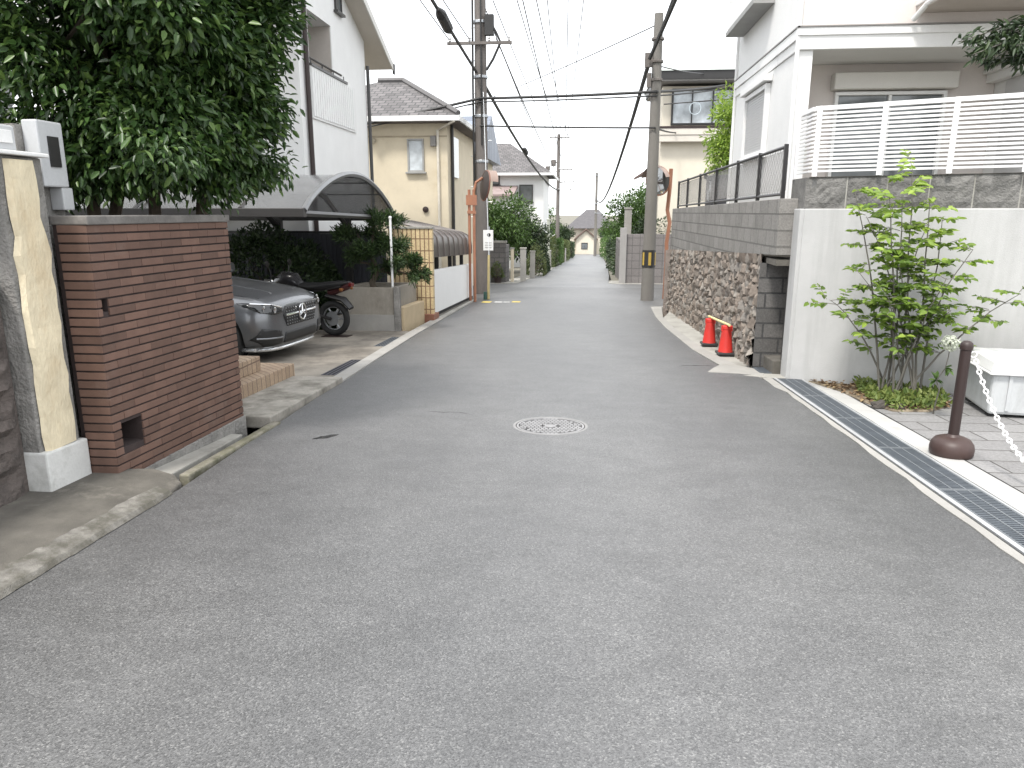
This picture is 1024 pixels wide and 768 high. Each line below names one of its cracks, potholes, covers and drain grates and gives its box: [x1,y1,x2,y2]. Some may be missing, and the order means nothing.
drain grate [778,378,827,396]
drain grate [939,489,1024,548]
drain grate [804,396,863,418]
drain grate [878,447,980,490]
manhole cover [513,417,588,435]
drain grate [321,360,360,375]
drain grate [836,418,912,448]
